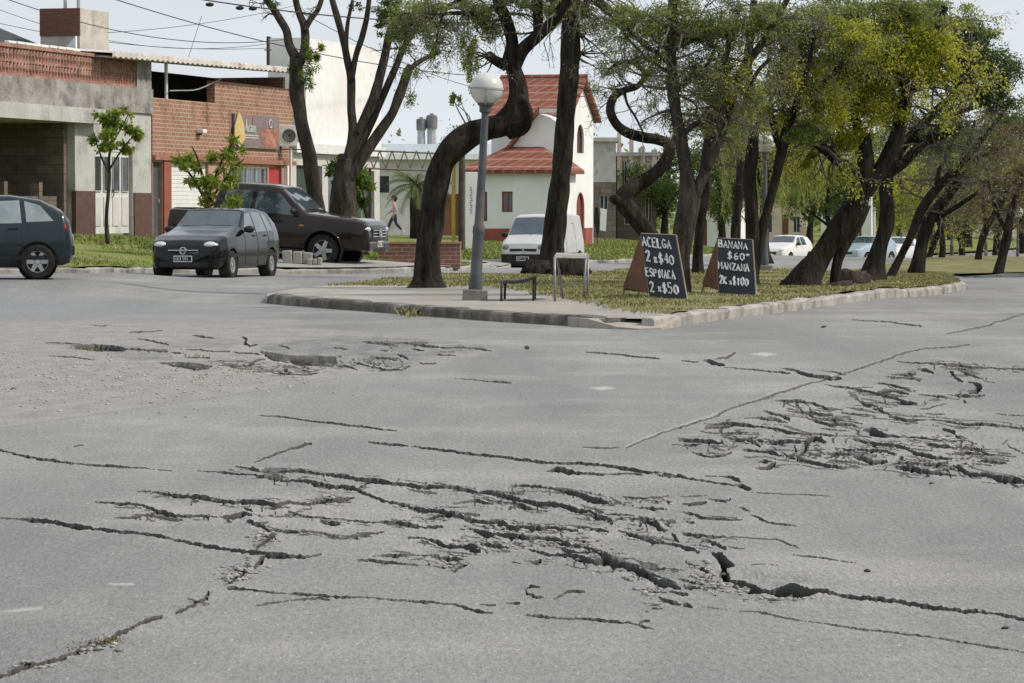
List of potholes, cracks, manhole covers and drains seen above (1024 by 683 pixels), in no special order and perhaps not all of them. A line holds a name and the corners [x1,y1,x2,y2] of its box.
pothole [71,343,126,352]
crack [46,325,492,376]
pothole [260,351,338,367]
crack [0,351,1024,653]
